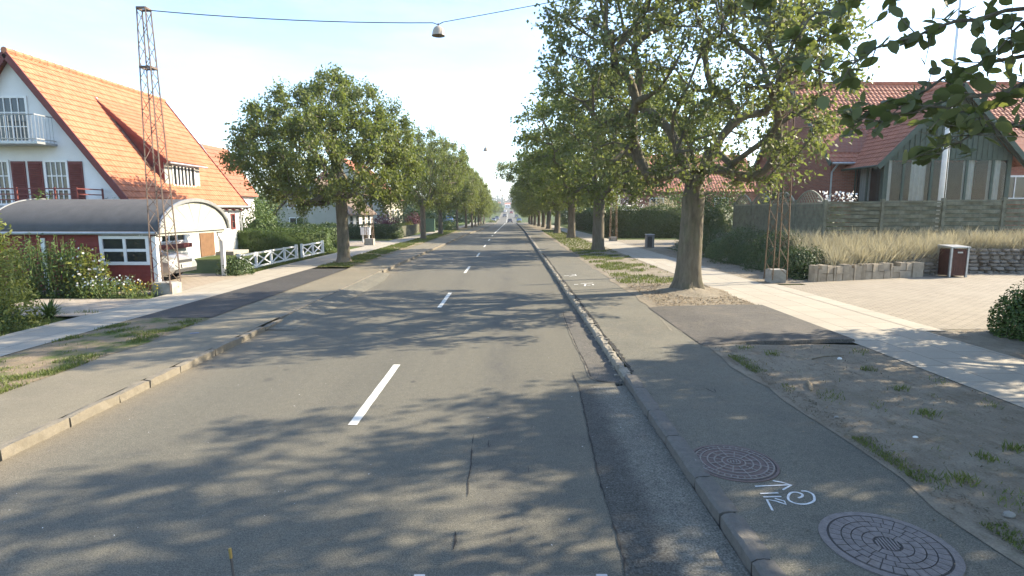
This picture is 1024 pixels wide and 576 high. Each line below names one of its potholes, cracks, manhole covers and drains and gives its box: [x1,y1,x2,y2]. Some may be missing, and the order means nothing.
manhole cover [818,512,966,576]
manhole cover [693,445,780,483]
crack [467,435,489,496]
